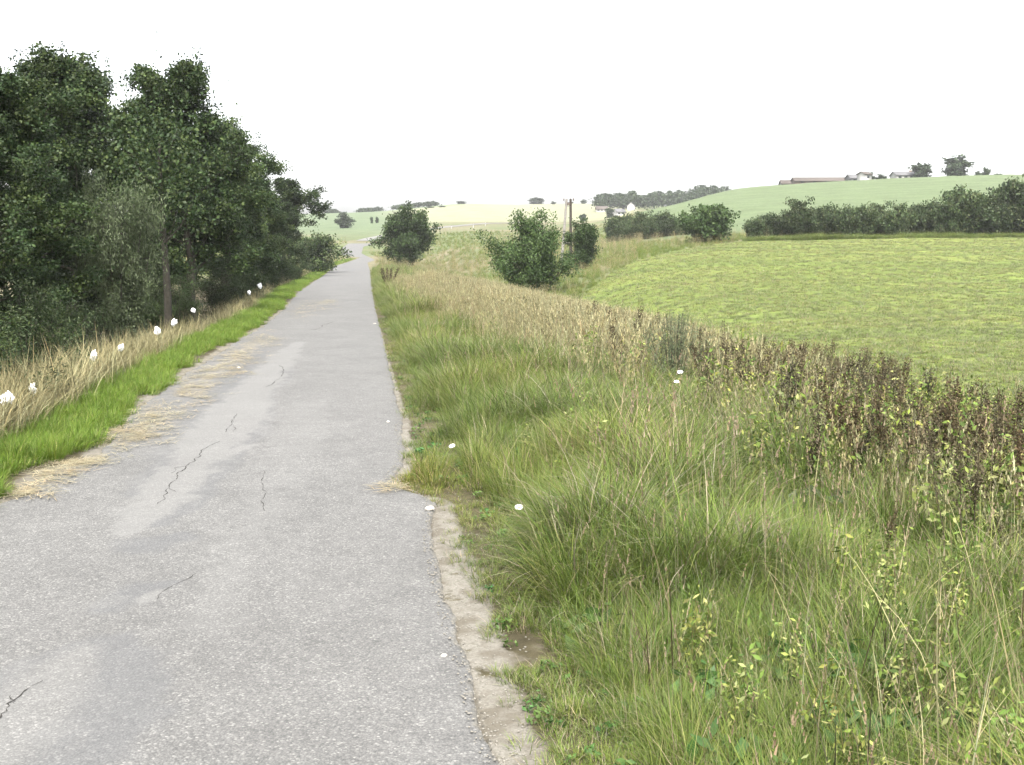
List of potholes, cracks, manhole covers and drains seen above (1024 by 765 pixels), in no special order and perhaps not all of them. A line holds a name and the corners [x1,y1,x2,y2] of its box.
crack [0,680,43,718]
crack [157,417,236,504]
